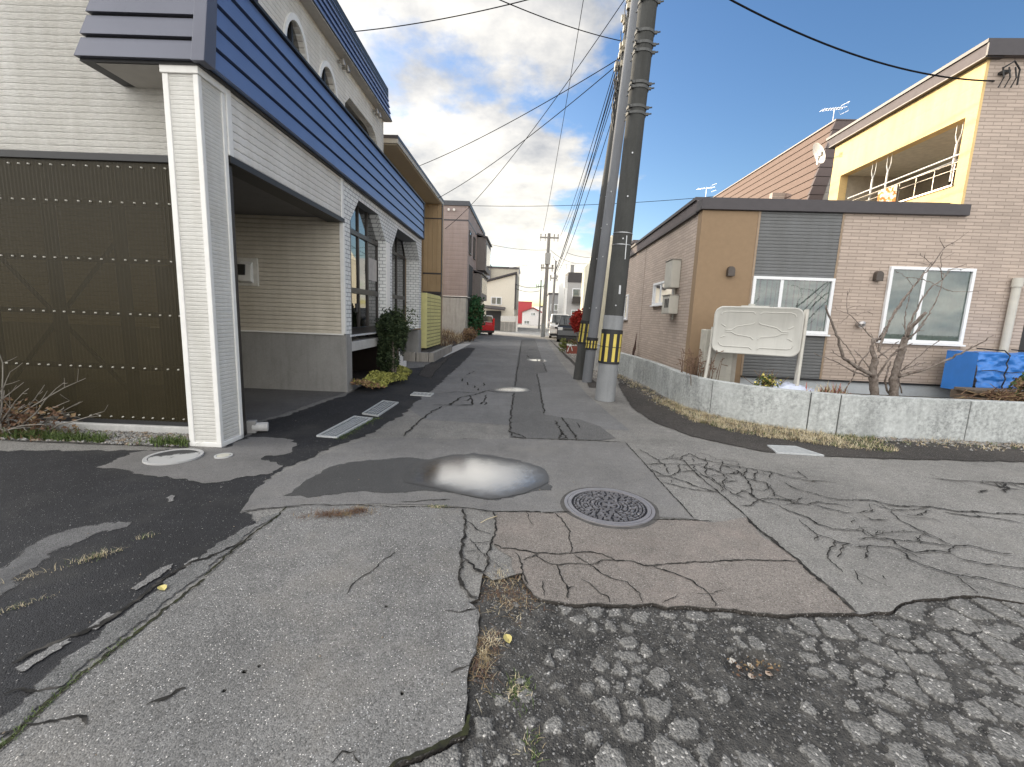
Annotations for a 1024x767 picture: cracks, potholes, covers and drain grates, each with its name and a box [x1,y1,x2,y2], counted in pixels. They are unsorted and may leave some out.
crack [0,342,1024,767]
manhole cover [564,488,655,527]
drain grate [316,415,372,438]
drain grate [362,400,399,417]
manhole cover [142,448,204,466]
